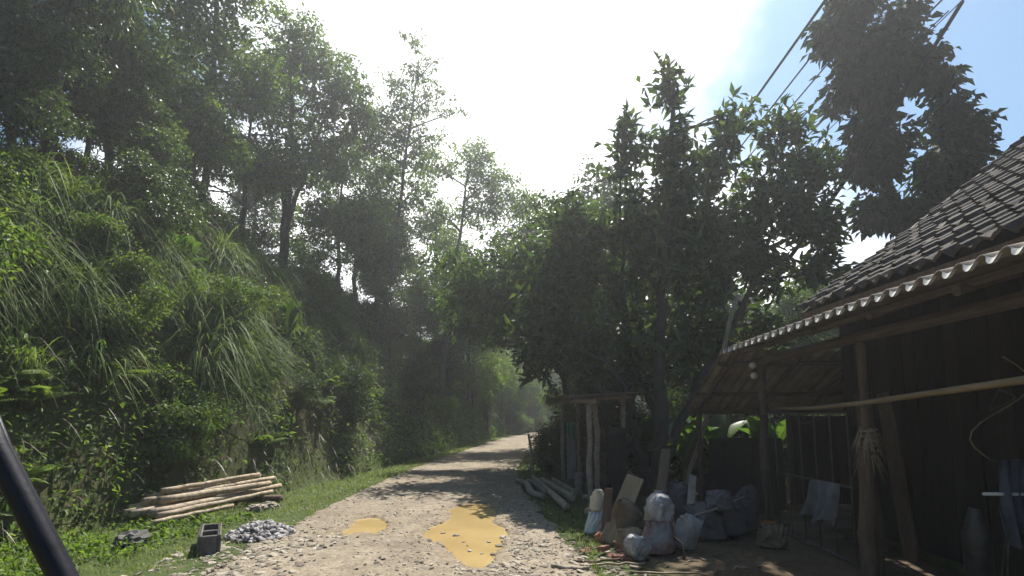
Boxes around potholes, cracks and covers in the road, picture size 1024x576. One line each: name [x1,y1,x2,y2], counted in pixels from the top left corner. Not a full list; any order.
pothole [324,513,399,537]
pothole [409,500,521,572]
